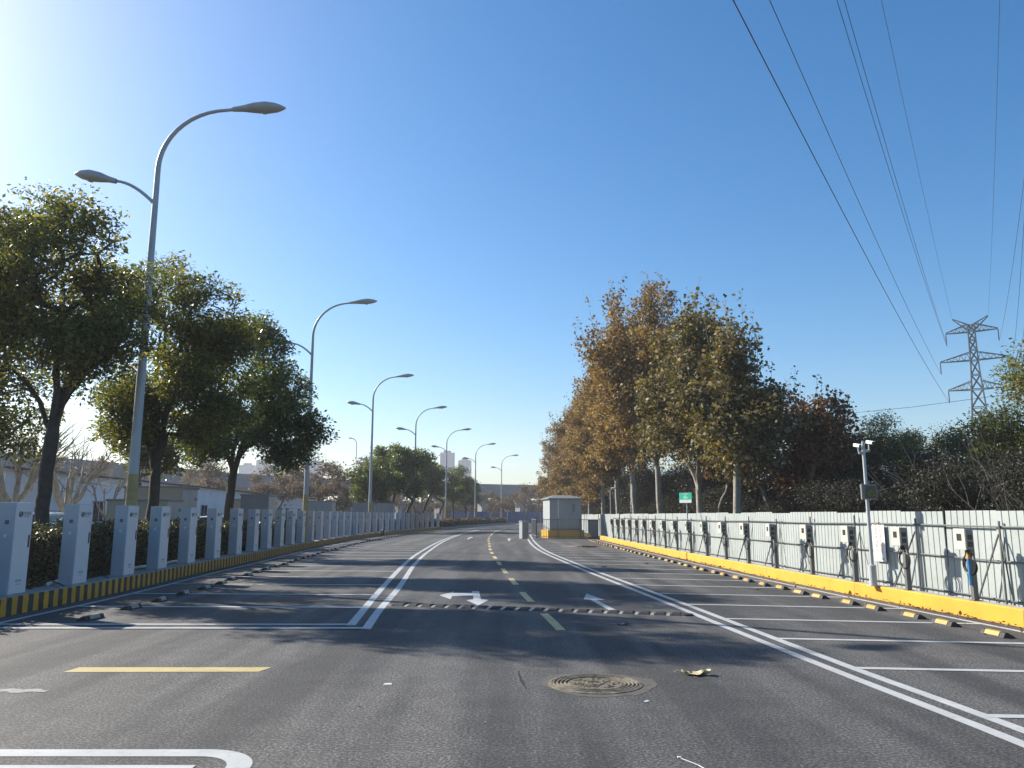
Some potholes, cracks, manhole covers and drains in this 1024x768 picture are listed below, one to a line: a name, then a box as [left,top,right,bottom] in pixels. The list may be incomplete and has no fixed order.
manhole cover [539,674,657,697]
